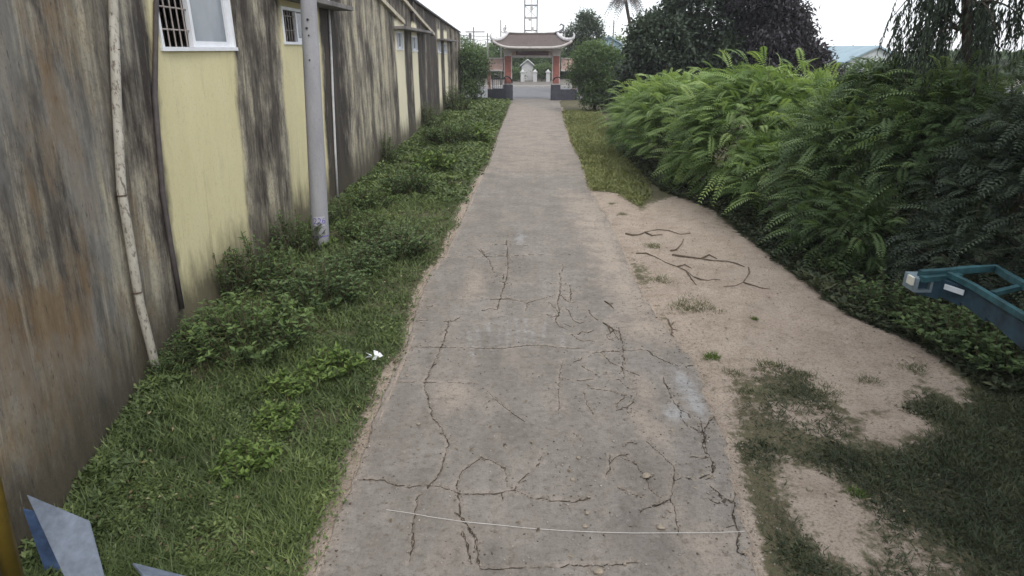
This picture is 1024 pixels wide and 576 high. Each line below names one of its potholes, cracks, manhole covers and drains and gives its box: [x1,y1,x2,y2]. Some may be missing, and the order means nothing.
crack [366,240,744,564]
